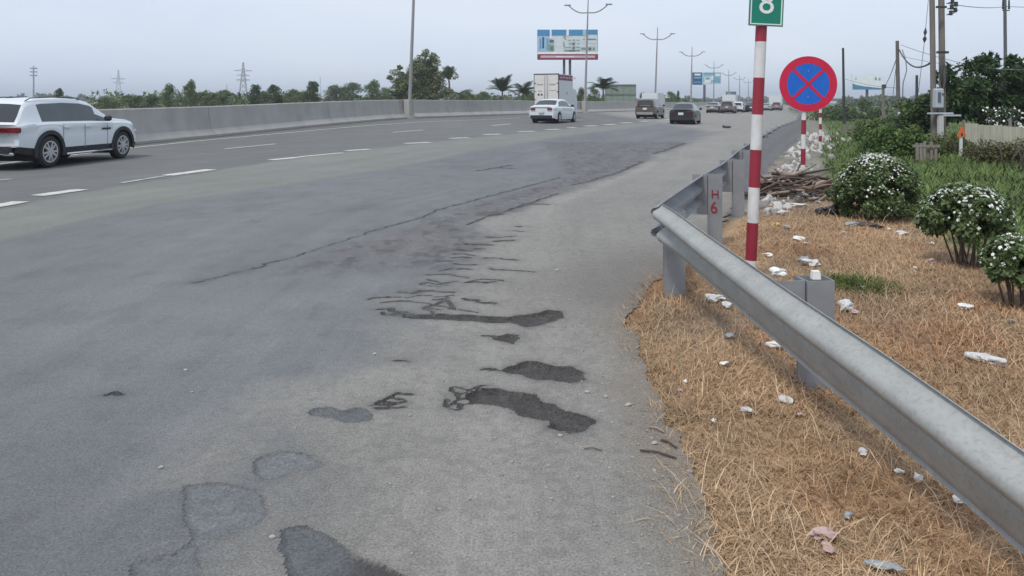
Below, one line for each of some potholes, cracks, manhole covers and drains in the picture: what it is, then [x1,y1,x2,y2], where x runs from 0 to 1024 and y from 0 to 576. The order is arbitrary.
crack [368,392,414,410]
crack [189,143,686,316]
